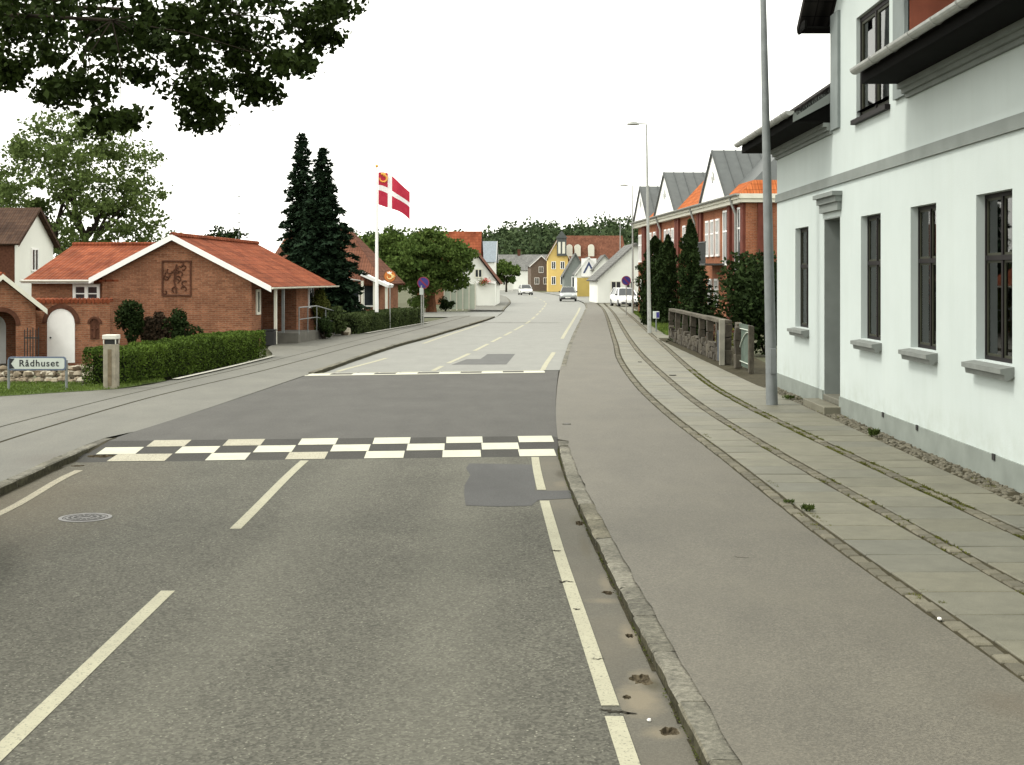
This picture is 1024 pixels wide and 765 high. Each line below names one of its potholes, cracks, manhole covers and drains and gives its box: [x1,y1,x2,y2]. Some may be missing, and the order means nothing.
pothole [629,674,653,685]
pothole [659,727,680,736]
manhole cover [58,513,112,522]
